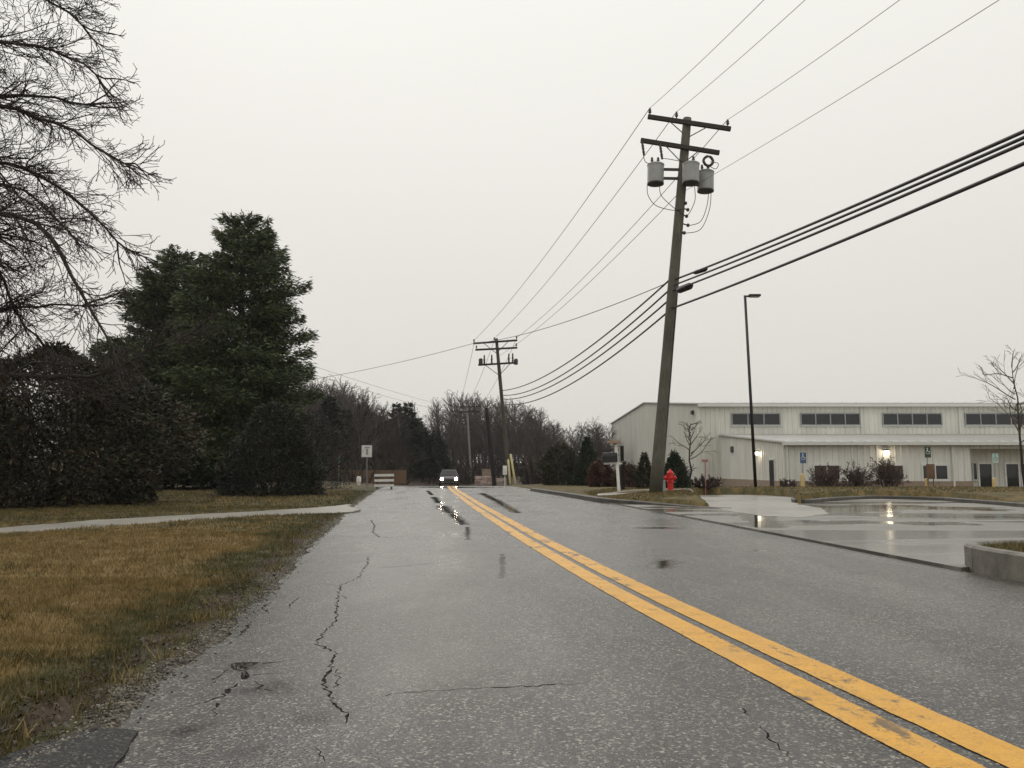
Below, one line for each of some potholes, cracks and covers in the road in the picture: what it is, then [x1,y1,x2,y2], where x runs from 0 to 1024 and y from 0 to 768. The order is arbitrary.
crack [315,557,432,725]
pothole [228,662,260,680]
crack [383,683,584,697]
crack [189,659,296,717]
crack [741,707,791,759]
